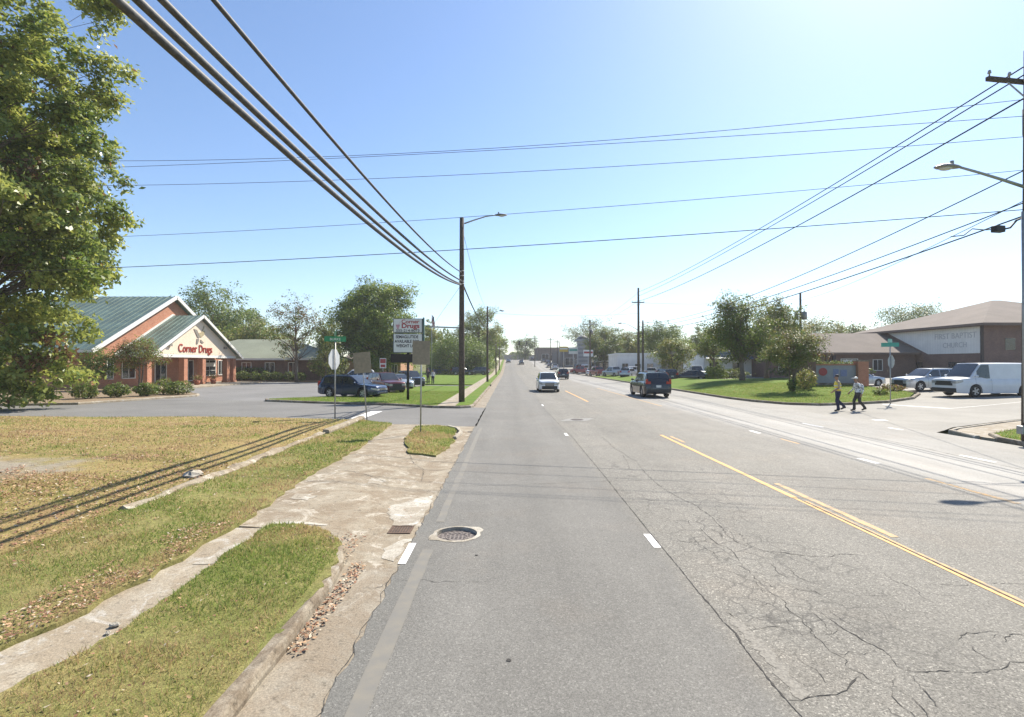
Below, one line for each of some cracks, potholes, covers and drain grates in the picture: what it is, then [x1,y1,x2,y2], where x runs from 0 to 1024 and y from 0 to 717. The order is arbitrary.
crack [474,444,1023,717]
drain grate [387,526,414,534]
manhole cover [429,526,483,542]
